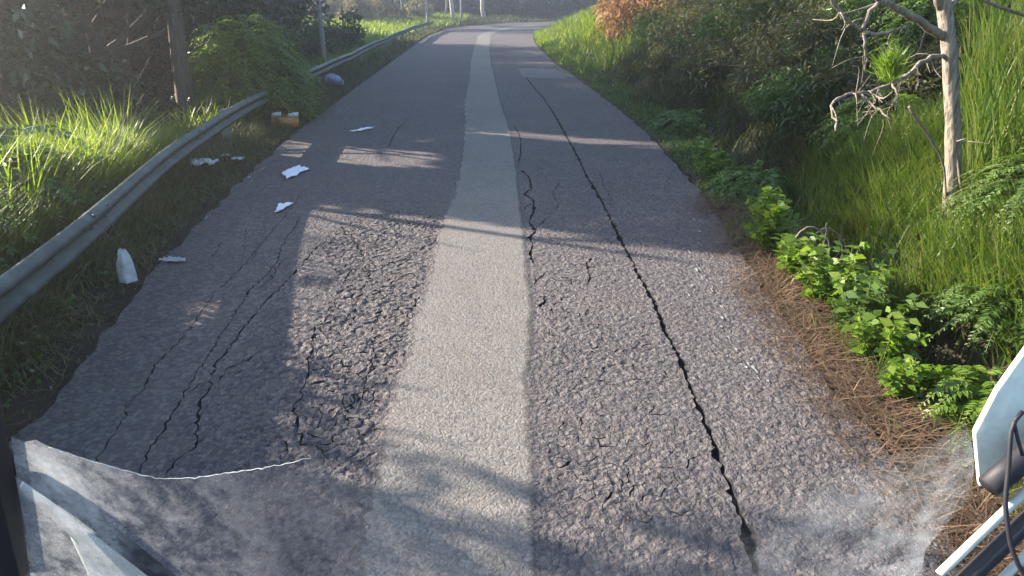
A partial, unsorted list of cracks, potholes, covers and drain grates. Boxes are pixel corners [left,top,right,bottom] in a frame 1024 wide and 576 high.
crack [86,192,320,484]
crack [280,210,440,464]
crack [515,77,761,576]
